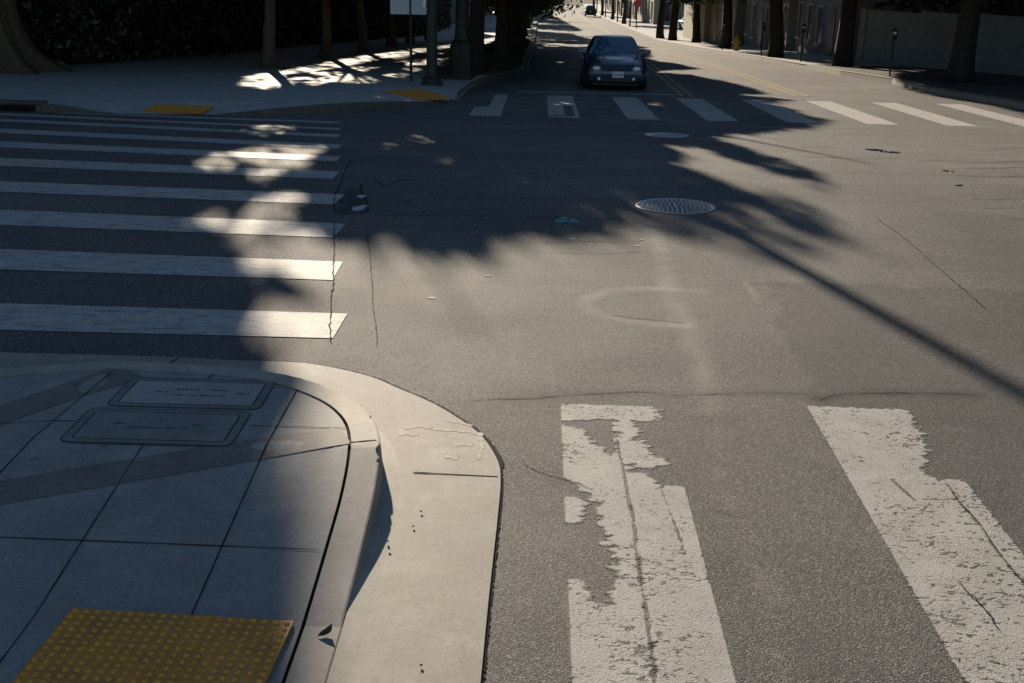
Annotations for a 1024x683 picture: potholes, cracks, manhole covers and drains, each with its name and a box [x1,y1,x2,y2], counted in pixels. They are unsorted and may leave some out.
utility cover [60,407,251,446]
crack [328,160,408,344]
manhole cover [636,198,716,215]
crack [947,483,1024,629]
utility cover [108,377,275,409]
crack [877,217,986,309]
